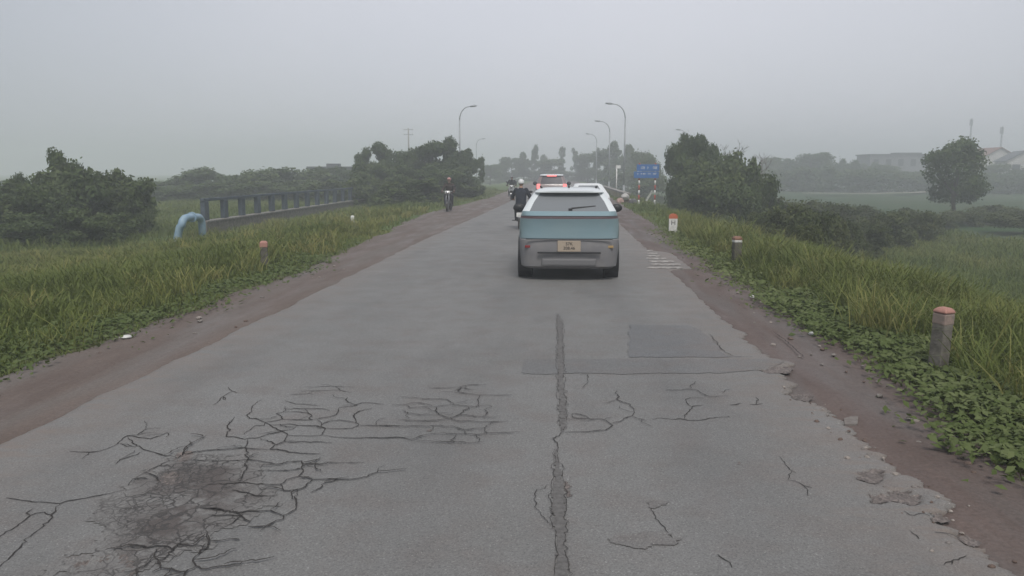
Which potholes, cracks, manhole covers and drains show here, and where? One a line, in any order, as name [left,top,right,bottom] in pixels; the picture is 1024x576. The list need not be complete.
pothole [856,469,885,485]
crack [0,384,518,576]
crack [656,381,763,420]
pothole [957,535,981,547]
pothole [868,490,922,506]
pothole [932,513,951,523]
crack [564,391,647,432]
